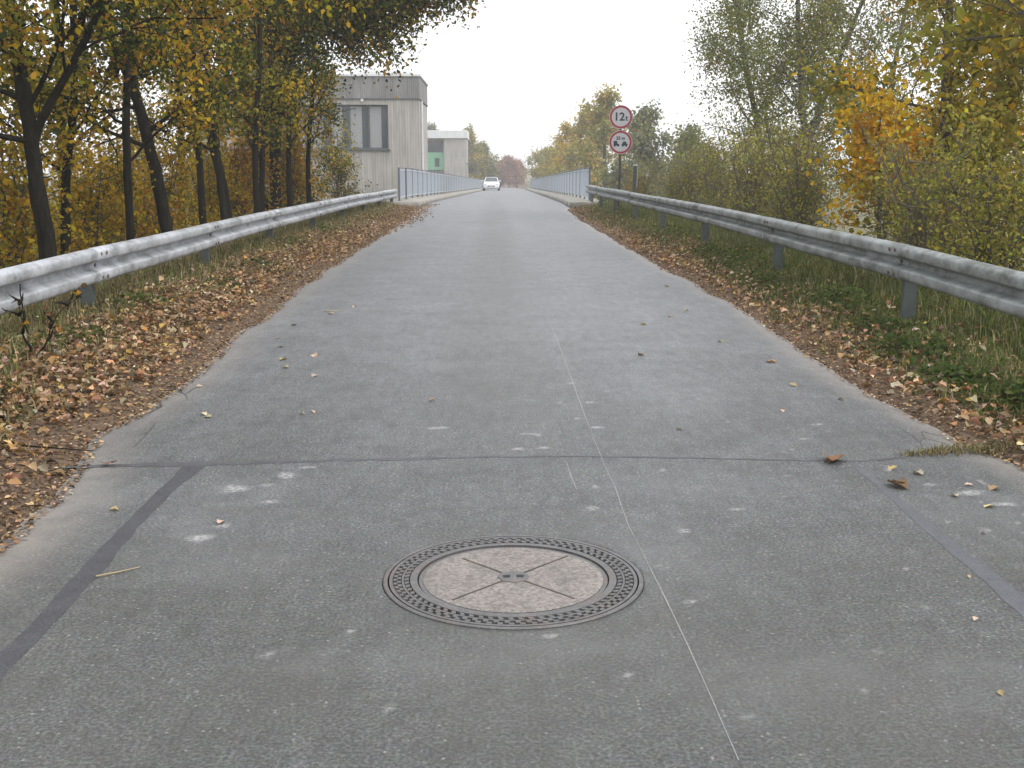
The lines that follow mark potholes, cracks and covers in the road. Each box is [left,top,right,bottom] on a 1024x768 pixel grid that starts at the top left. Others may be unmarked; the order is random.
manhole cover [383,535,644,630]
crack [902,429,959,451]
crack [132,384,206,448]
